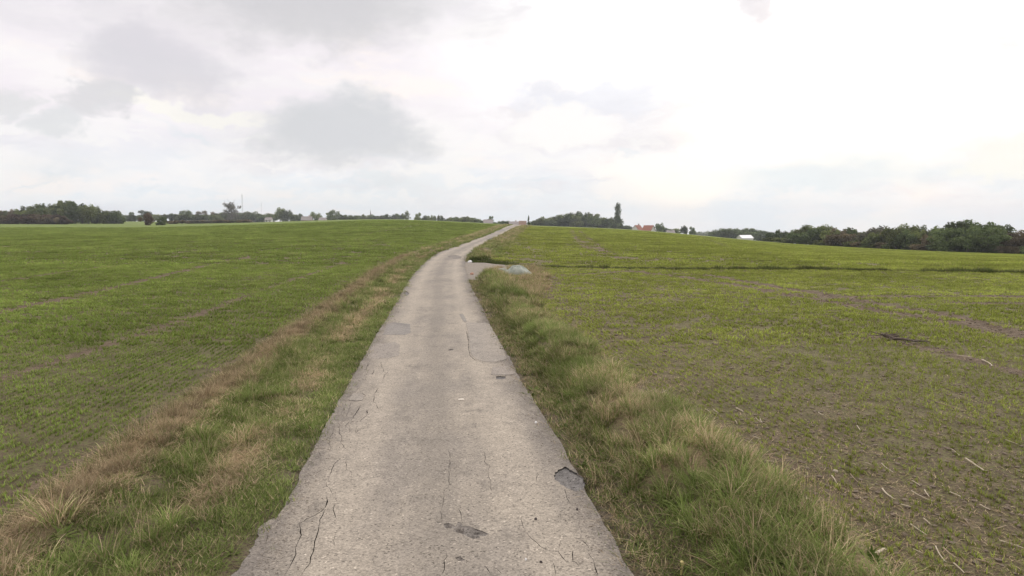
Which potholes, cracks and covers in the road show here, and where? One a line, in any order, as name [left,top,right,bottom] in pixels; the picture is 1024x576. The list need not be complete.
pothole [554,467,585,492]
pothole [443,522,488,539]
